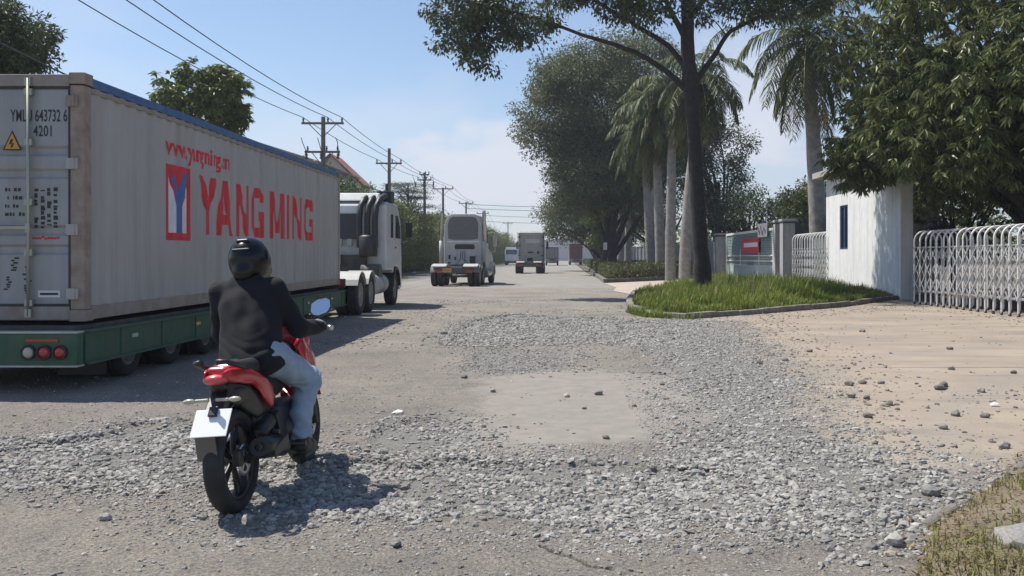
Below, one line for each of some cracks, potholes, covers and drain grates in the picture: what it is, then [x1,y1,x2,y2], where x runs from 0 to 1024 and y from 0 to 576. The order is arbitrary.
crack [532,542,622,573]
